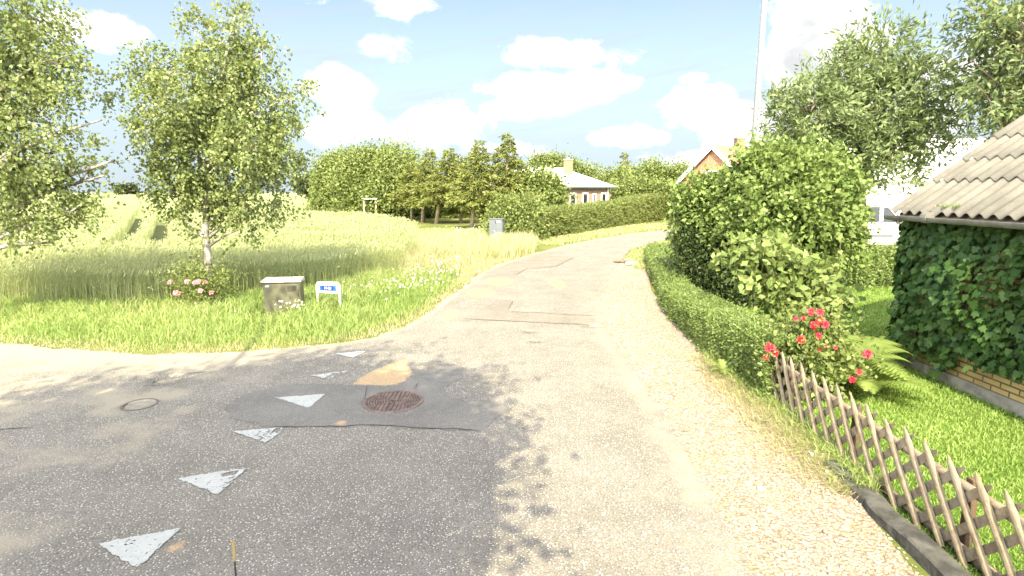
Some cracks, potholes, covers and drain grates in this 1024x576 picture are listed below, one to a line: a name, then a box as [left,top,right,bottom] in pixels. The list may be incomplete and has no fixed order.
manhole cover [362,390,424,413]
manhole cover [119,398,159,411]
